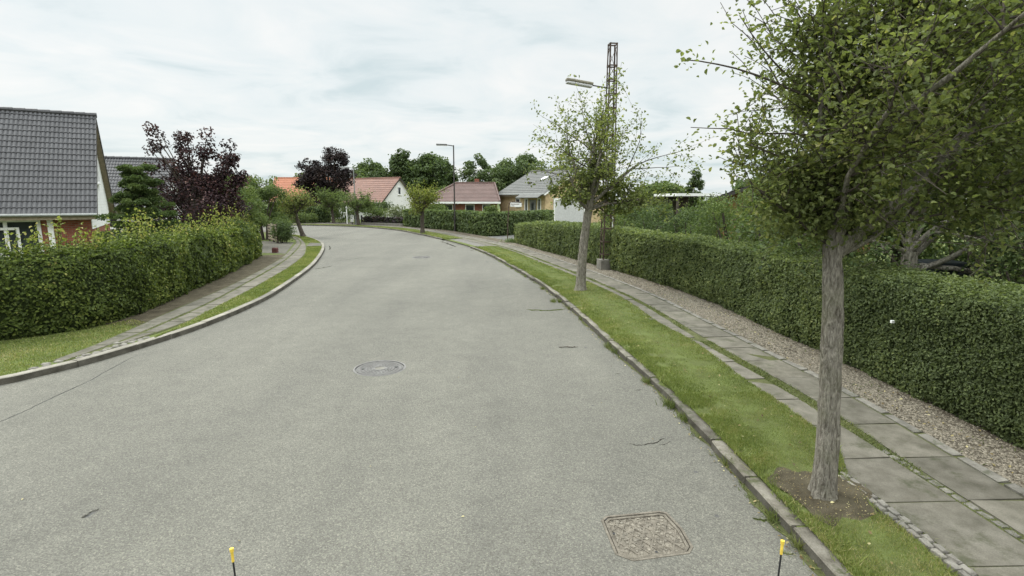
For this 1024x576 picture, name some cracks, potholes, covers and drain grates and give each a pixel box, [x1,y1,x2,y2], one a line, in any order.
manhole cover [353,360,406,376]
manhole cover [601,511,693,561]
